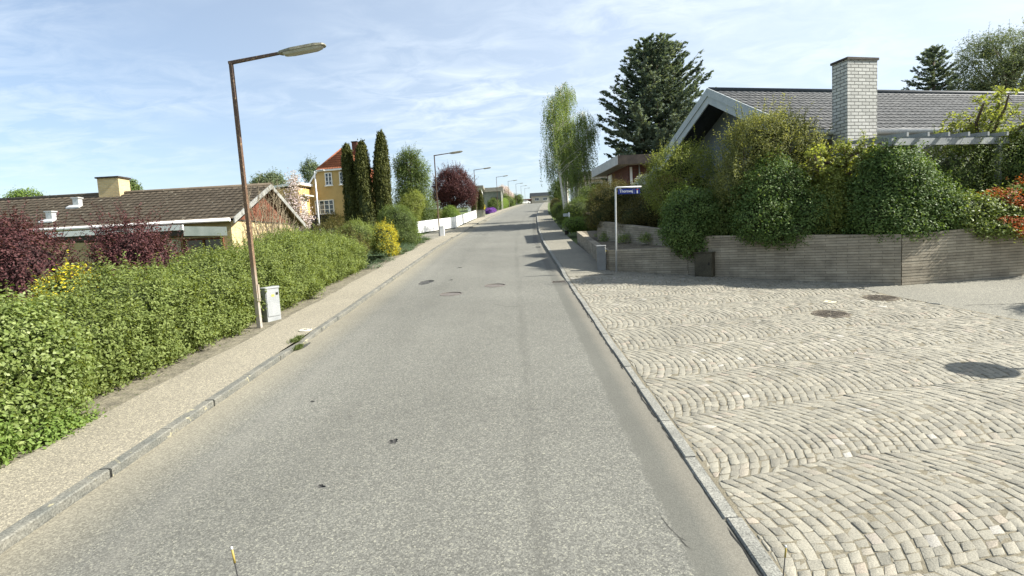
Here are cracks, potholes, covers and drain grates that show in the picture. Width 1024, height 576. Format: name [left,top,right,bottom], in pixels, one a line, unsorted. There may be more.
manhole cover [811,310,850,318]
